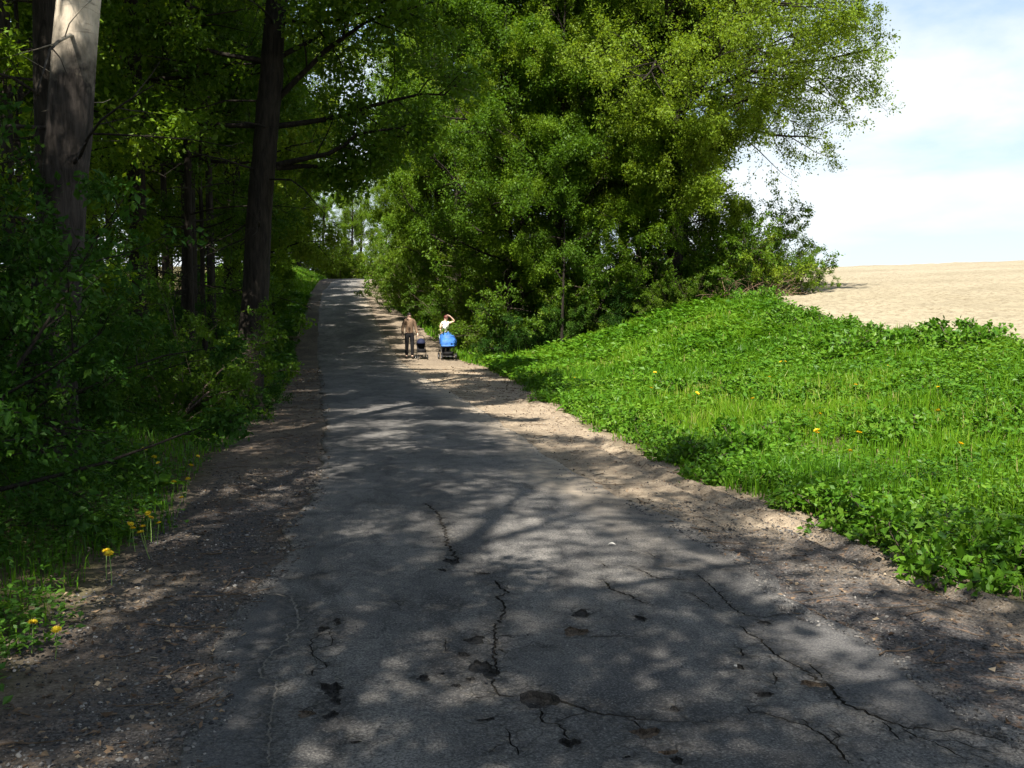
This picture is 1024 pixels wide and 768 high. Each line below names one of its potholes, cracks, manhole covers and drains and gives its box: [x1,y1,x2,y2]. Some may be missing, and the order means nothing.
crack [488,729,519,755]
pothole [520,691,561,711]
crack [539,553,1003,764]
pothole [558,738,581,748]
crack [258,594,333,766]
crack [425,503,459,561]
pothole [321,681,343,701]
crack [491,580,514,697]
pothole [468,660,501,679]
pothole [564,626,589,637]
pothole [571,609,590,618]
